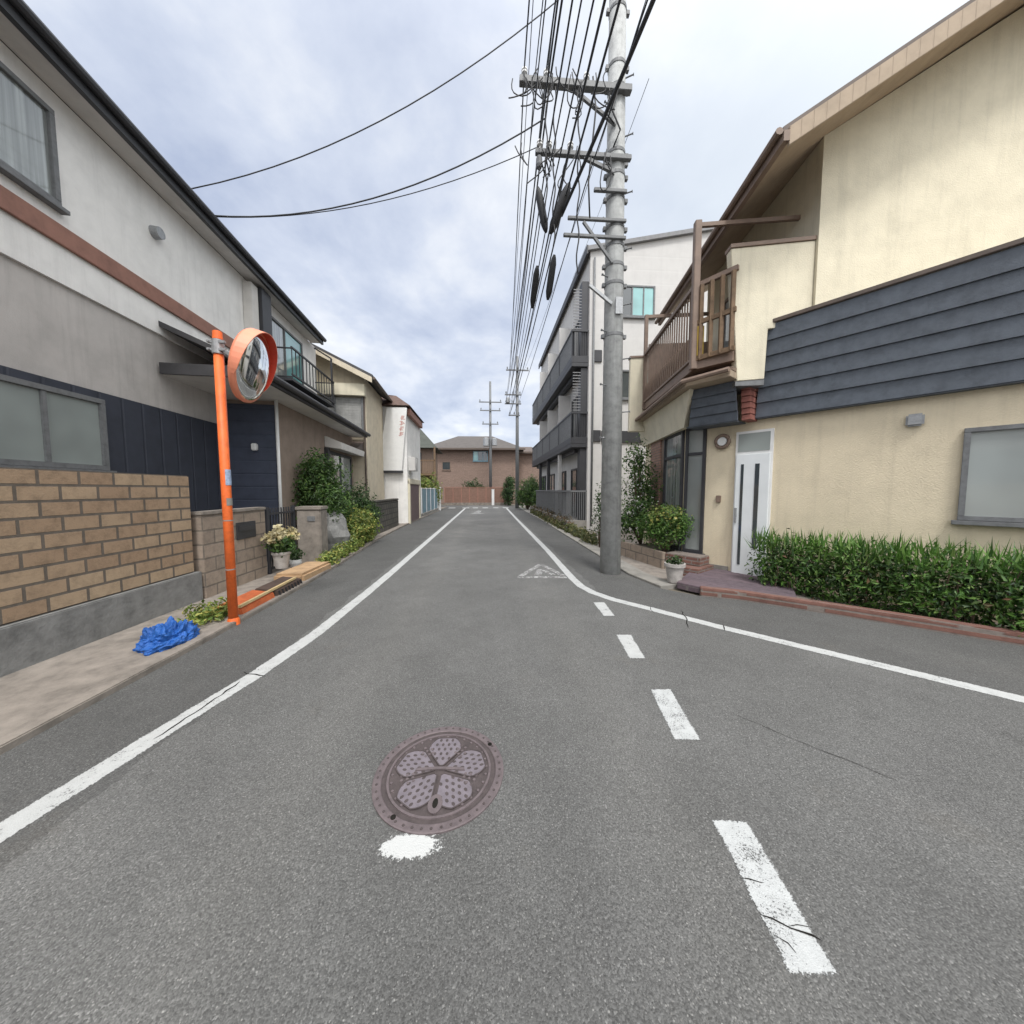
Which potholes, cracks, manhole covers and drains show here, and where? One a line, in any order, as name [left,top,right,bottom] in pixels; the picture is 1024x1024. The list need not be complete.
crack [760,914,822,951]
crack [154,672,265,739]
manhole cover [372,726,504,836]
